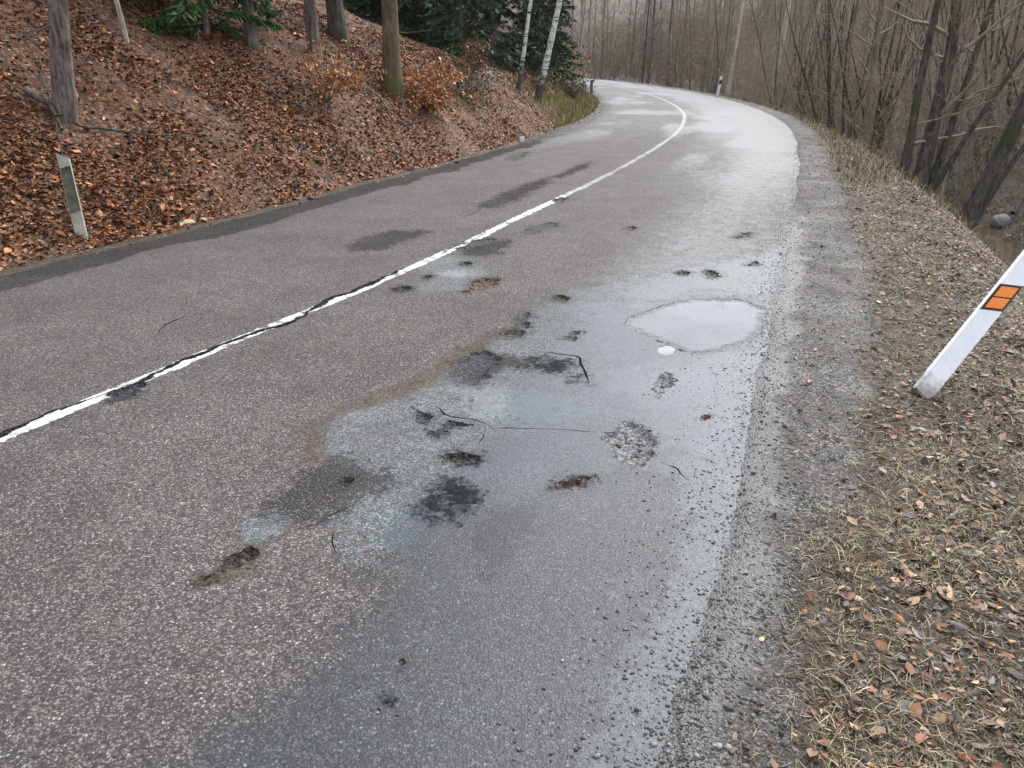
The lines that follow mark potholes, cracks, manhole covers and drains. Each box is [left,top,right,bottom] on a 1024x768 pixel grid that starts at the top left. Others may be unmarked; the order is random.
crack [438,408,499,444]
pothole [498,312,531,338]
pothole [550,476,592,490]
pothole [200,546,260,582]
pothole [441,452,481,465]
pothole [461,278,501,293]
pothole [626,299,768,353]
pothole [651,372,679,399]
pothole [599,421,660,469]
pothole [656,345,677,355]
